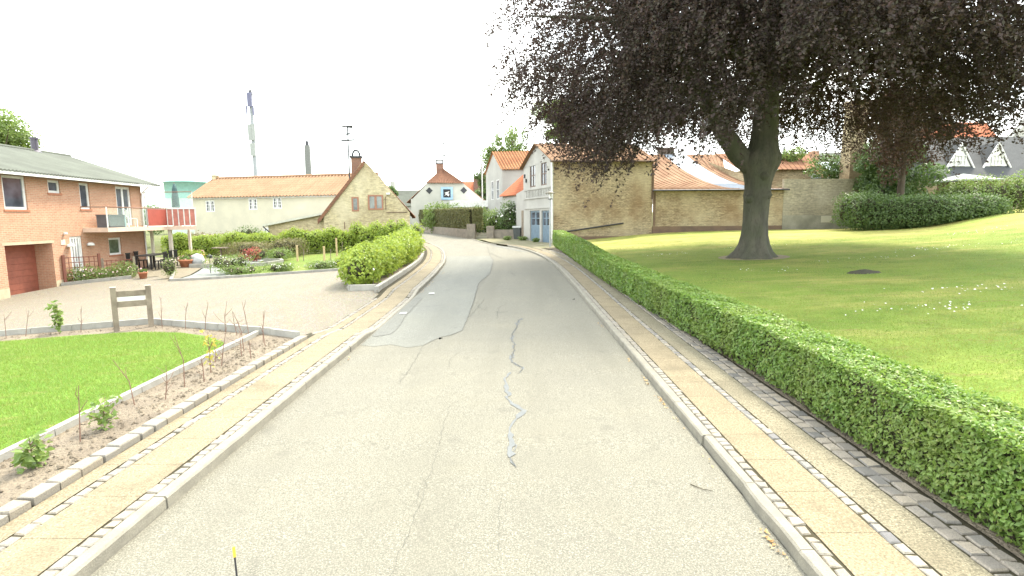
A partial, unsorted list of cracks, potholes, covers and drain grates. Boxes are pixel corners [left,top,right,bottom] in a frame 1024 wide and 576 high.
crack [391,406,450,574]
